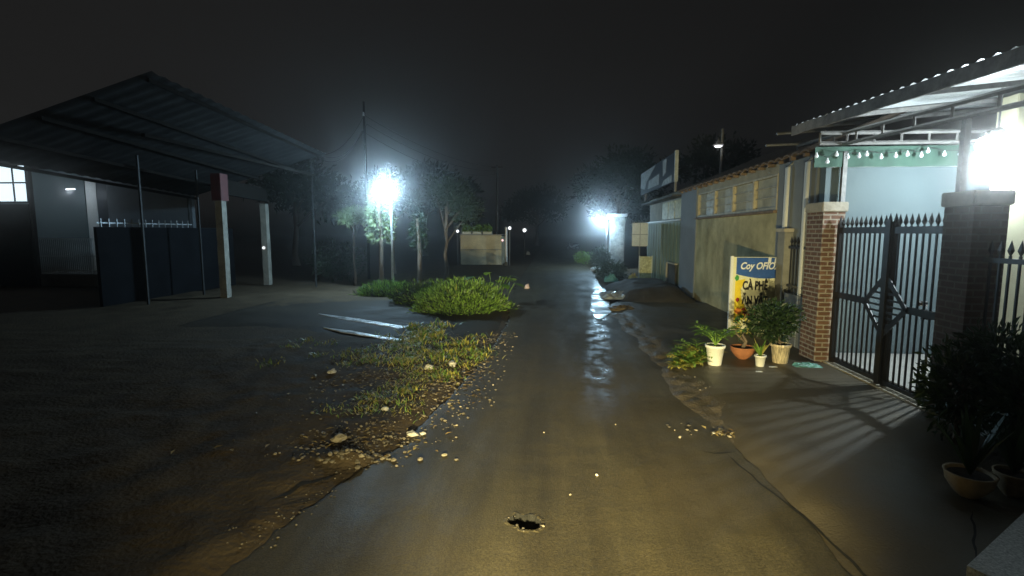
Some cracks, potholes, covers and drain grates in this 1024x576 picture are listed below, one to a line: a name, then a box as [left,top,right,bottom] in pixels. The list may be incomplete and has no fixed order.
pothole [504,512,545,533]
crack [705,451,867,576]
